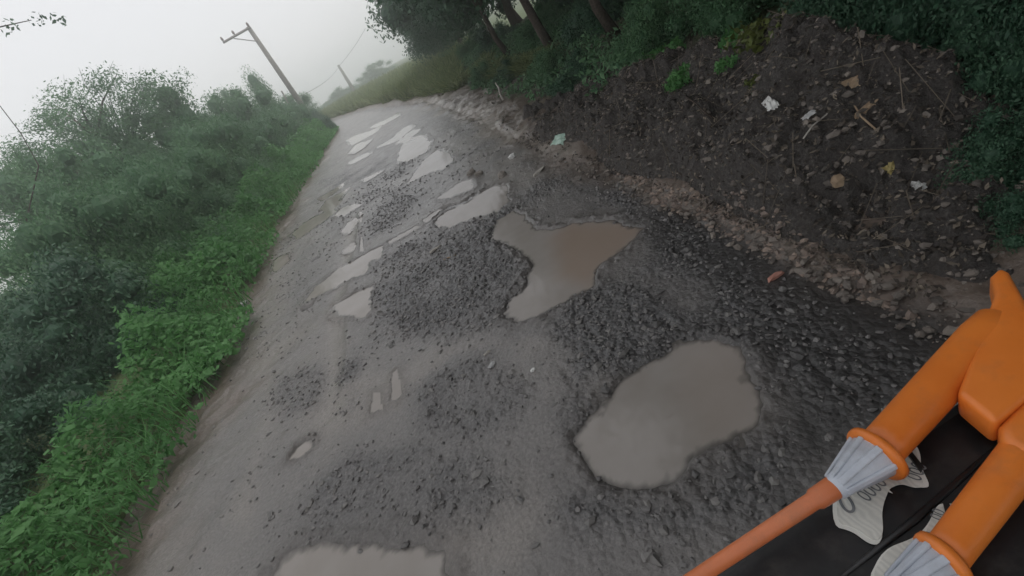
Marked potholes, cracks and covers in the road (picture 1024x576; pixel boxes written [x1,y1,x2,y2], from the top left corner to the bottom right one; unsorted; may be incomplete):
pothole [256,519,467,576]
pothole [326,281,382,325]
pothole [373,124,416,150]
pothole [394,134,434,164]
pothole [393,127,422,146]
pothole [434,176,480,204]
pothole [299,241,390,306]
pothole [402,148,459,186]
pothole [283,431,321,468]
pothole [346,125,383,147]
pothole [557,324,788,507]
pothole [346,151,373,166]
